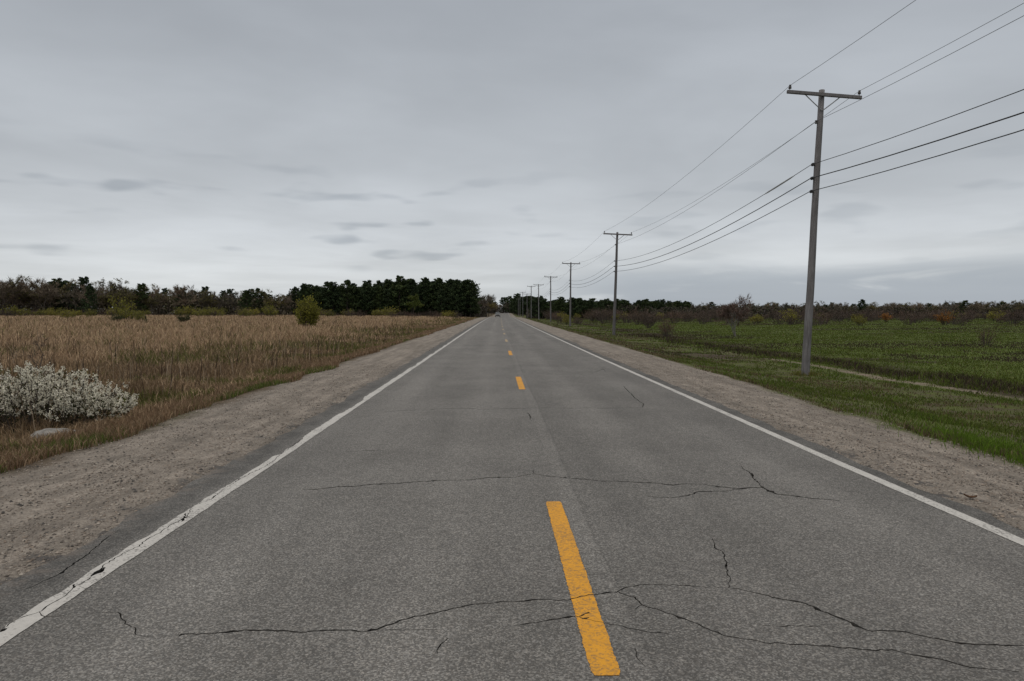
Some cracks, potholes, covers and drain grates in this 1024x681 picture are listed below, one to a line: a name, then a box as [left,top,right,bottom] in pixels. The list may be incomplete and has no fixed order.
crack [302,466,838,501]
crack [77,538,1024,672]
crack [404,387,644,421]
